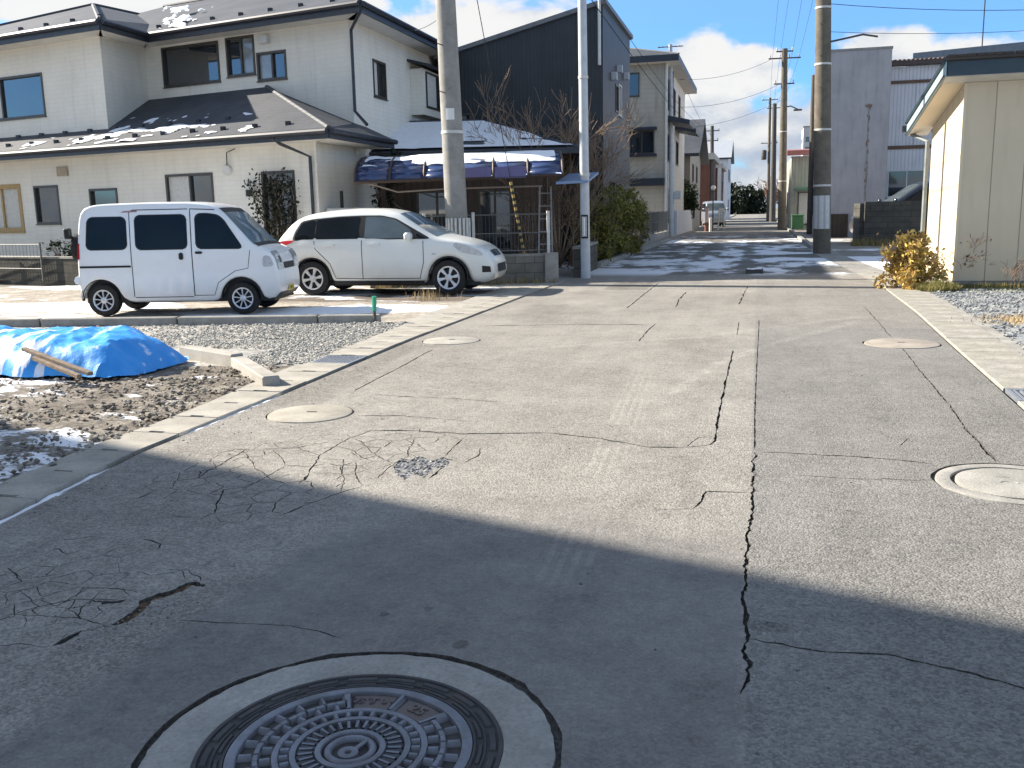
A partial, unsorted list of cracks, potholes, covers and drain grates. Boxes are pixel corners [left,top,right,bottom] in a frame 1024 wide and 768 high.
manhole cover [862,338,942,349]
crack [867,310,997,462]
crack [663,452,1024,694]
drain grate [310,355,367,366]
crack [131,323,750,523]
manhole cover [930,463,1024,505]
drain grate [1005,389,1024,404]
manhole cover [265,405,354,423]
pothole [393,457,453,480]
manhole cover [131,652,562,768]
manhole cover [422,336,481,345]
